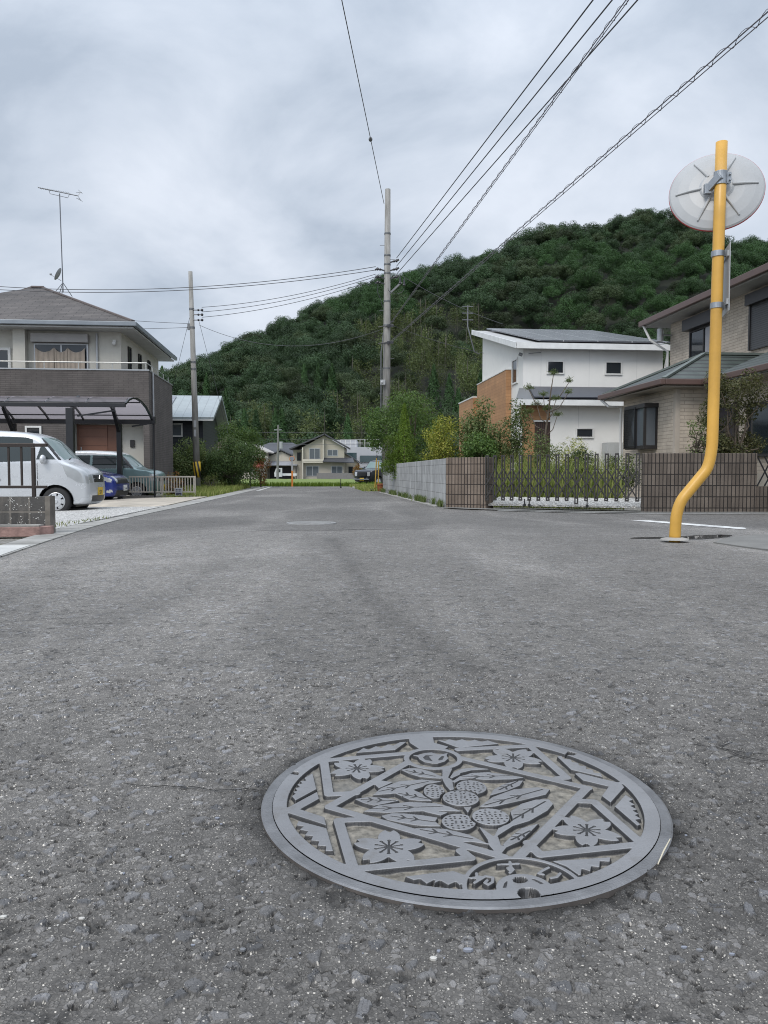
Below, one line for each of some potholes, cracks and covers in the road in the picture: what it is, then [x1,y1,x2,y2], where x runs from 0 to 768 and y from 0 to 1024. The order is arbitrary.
manhole cover [261,731,673,915]
crack [126,783,257,791]
